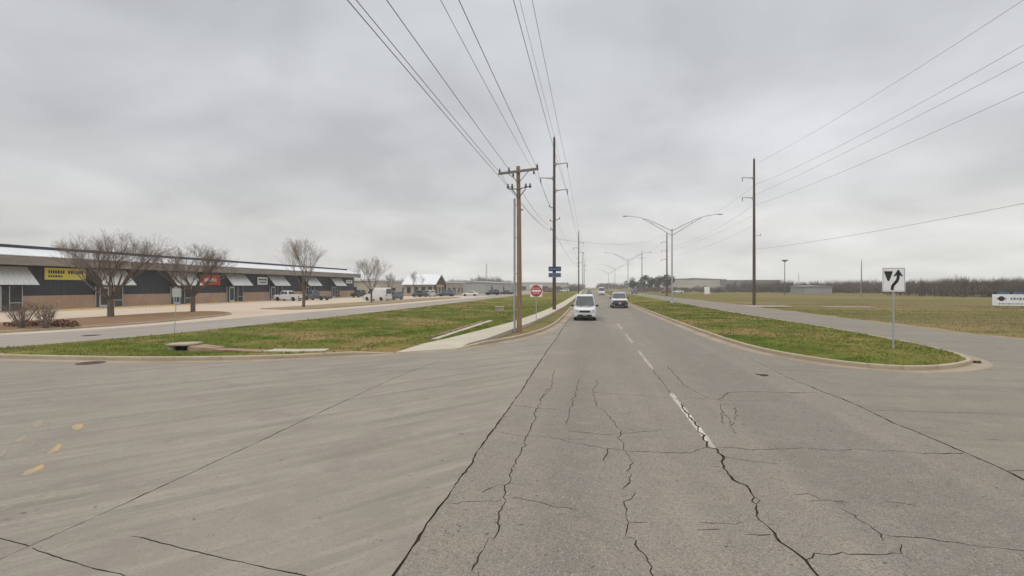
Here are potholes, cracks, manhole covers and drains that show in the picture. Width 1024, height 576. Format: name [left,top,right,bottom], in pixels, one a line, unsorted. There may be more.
drain grate [166,342,225,351]
crack [391,320,1024,576]
